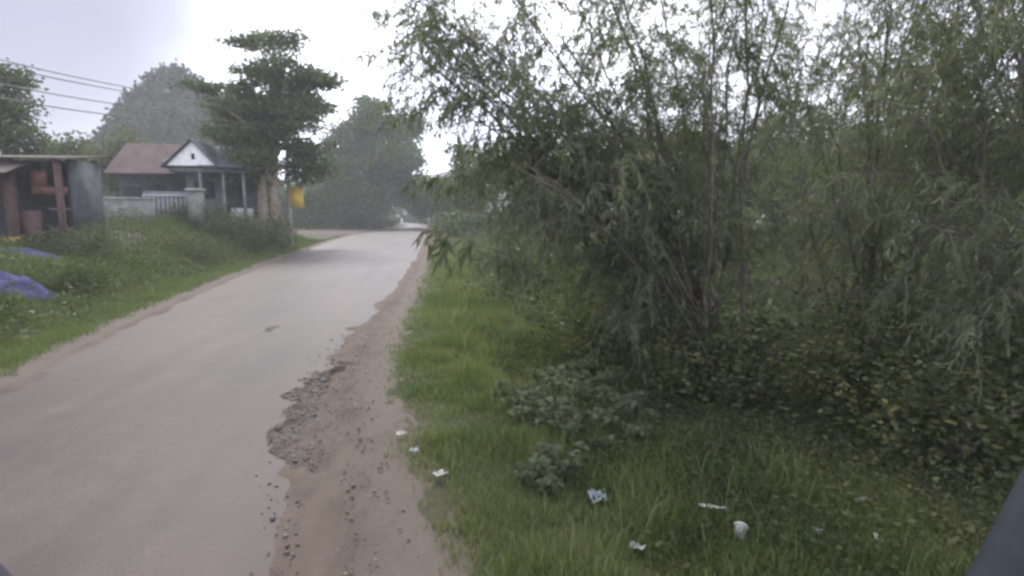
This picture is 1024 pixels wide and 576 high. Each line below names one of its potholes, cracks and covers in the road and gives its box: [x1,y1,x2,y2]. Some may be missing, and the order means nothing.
pothole [262,362,341,474]
